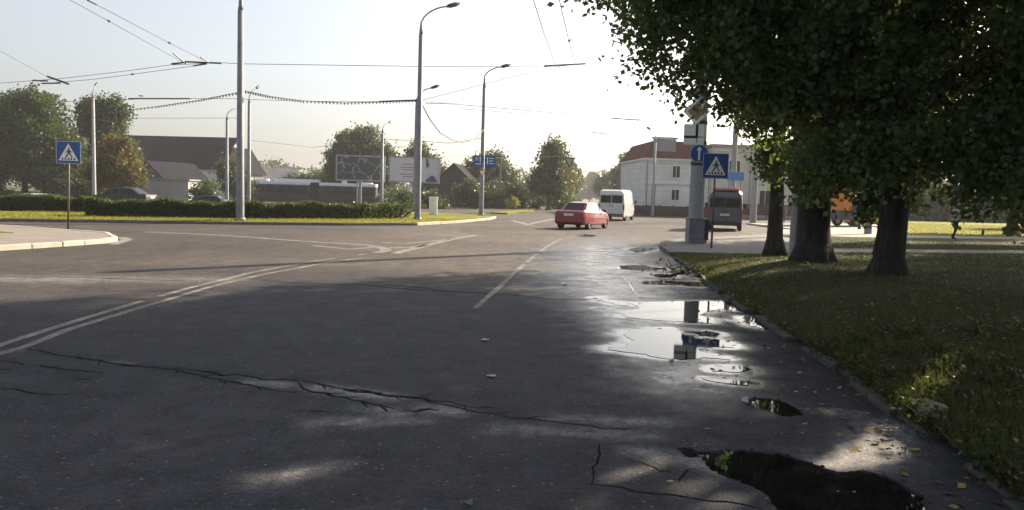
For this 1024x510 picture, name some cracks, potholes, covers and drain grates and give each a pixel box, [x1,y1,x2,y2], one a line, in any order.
pothole [746,396,803,417]
pothole [676,447,699,458]
pothole [692,448,932,510]
crack [0,348,764,510]
